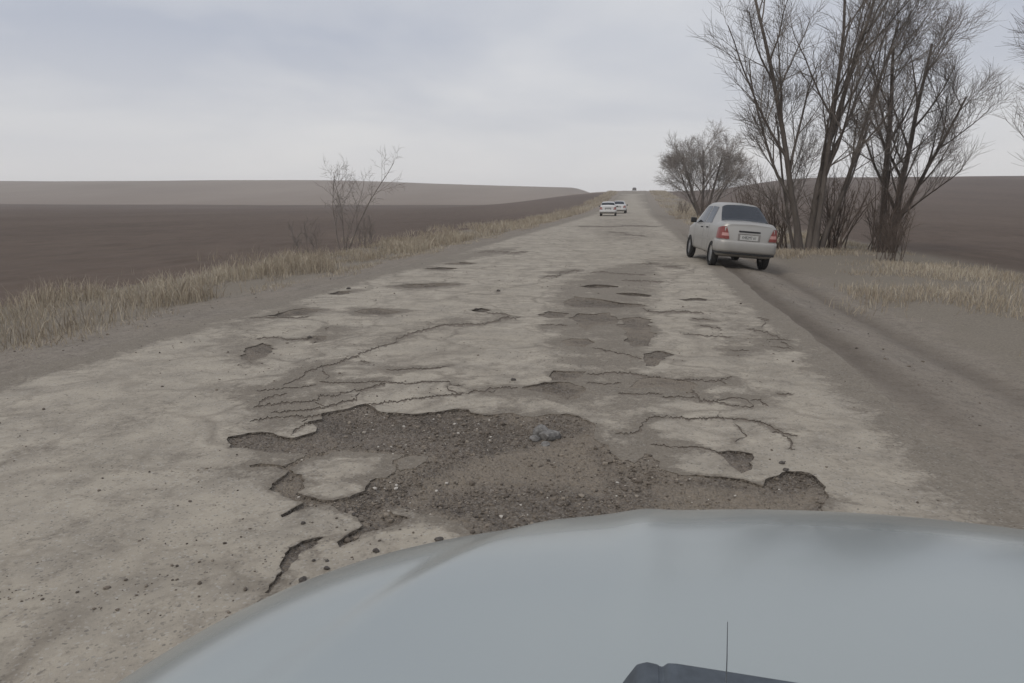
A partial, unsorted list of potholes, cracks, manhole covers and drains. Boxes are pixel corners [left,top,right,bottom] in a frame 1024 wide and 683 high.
pothole [227,403,829,547]
crack [643,308,794,352]
crack [250,312,519,434]
pothole [643,351,674,366]
crack [588,348,798,452]
pothole [240,343,274,362]
